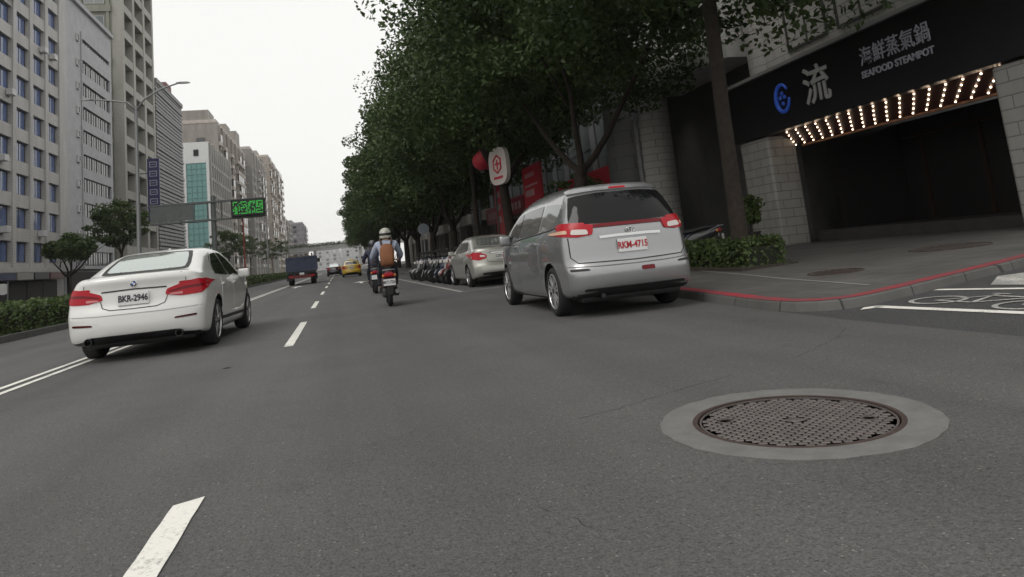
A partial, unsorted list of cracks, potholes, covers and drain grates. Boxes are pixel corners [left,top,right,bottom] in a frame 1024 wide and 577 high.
manhole cover [660,388,950,461]
manhole cover [807,268,865,276]
manhole cover [908,242,993,252]
